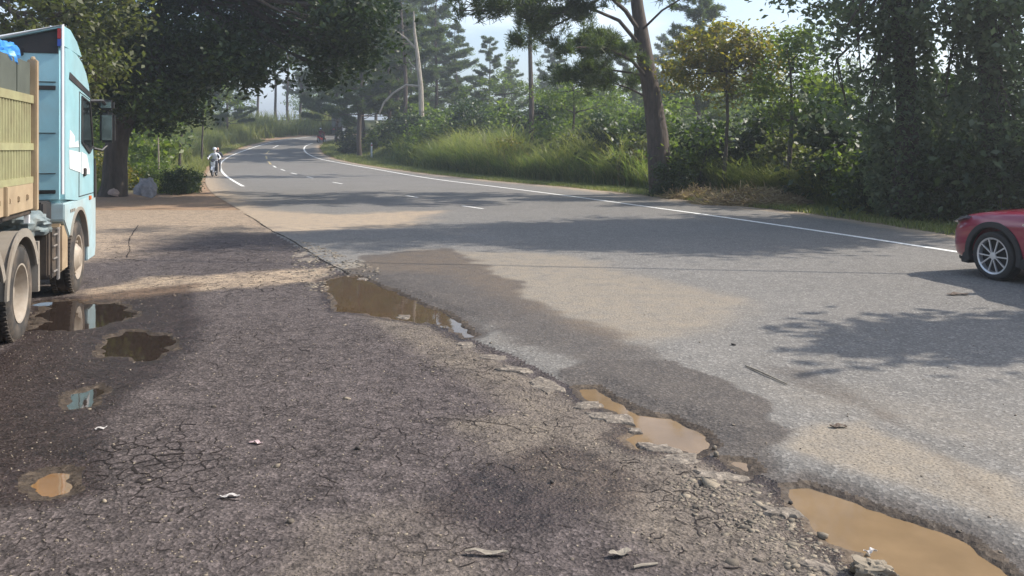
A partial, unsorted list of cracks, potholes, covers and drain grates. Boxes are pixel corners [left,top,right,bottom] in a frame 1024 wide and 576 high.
pothole [777,480,1024,576]
crack [83,421,234,523]
pothole [569,384,724,458]
pothole [58,382,112,410]
pothole [320,274,482,339]
crack [332,330,788,576]
pothole [92,329,183,362]
pothole [25,299,142,331]
pothole [15,465,85,501]
crack [238,390,395,514]
